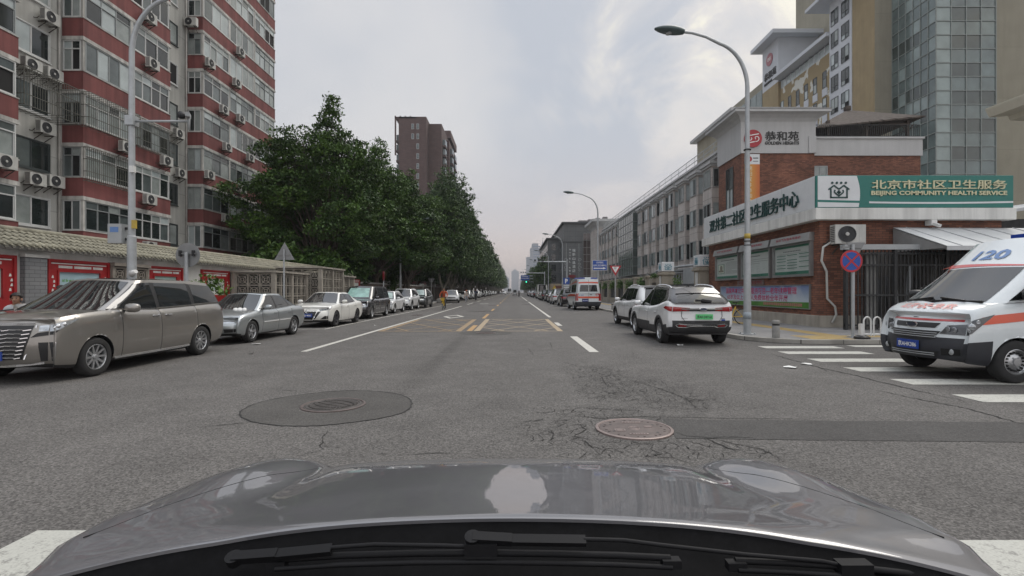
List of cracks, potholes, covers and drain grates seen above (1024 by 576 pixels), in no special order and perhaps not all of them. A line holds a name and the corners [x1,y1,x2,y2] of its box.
manhole cover [595,418,674,441]
manhole cover [300,398,366,413]
crack [514,361,800,462]
